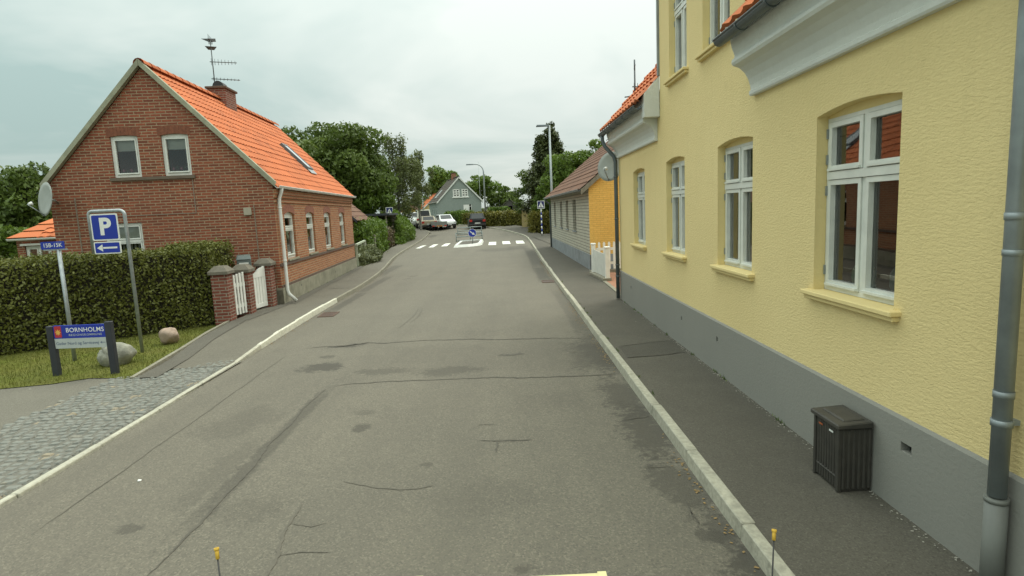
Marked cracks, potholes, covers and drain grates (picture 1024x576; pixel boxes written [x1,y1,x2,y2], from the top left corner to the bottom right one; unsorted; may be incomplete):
crack [147,374,607,576]
